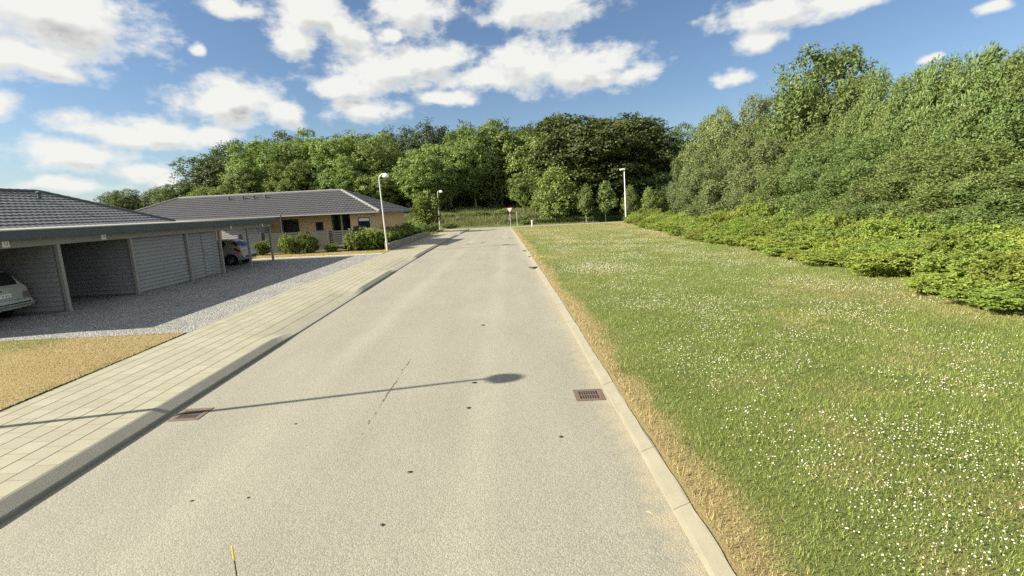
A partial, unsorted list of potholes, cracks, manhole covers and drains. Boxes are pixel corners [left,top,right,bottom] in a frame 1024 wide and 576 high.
drain grate [167,407,214,422]
drain grate [573,389,606,401]
